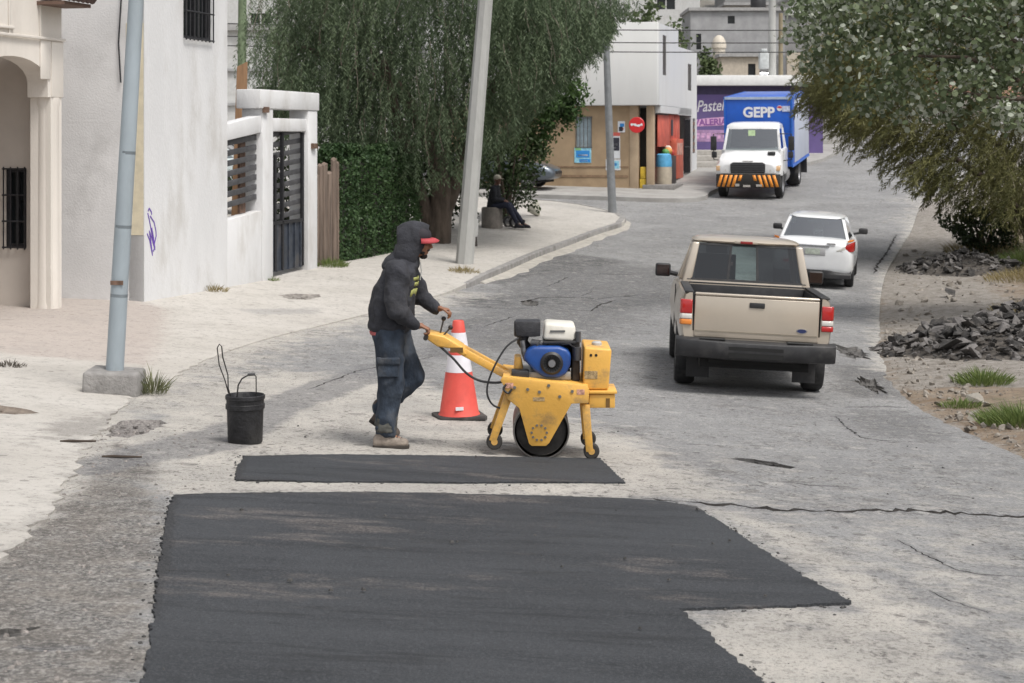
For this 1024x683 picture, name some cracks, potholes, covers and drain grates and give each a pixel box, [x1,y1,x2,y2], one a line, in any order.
crack [311,355,437,389]
pothole [105,419,167,438]
pothole [850,376,887,394]
crack [898,540,1004,576]
pothole [0,405,38,414]
crack [474,277,642,327]
pothole [835,344,870,359]
